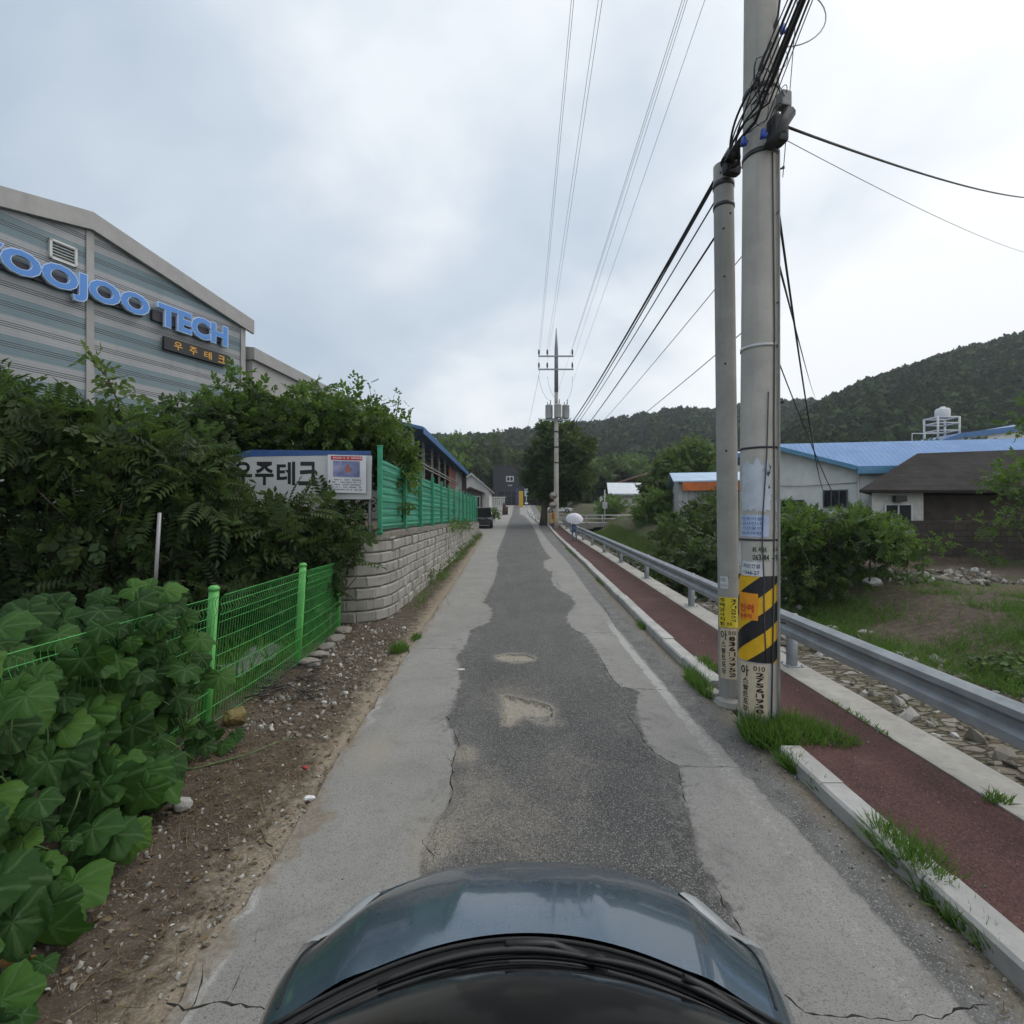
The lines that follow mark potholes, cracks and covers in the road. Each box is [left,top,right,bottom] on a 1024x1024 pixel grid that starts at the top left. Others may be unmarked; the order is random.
pothole [503,695,554,725]
crack [445,717,459,811]
crack [719,892,990,1022]
crack [629,718,739,804]
crack [166,927,265,1022]
pothole [496,654,535,663]
